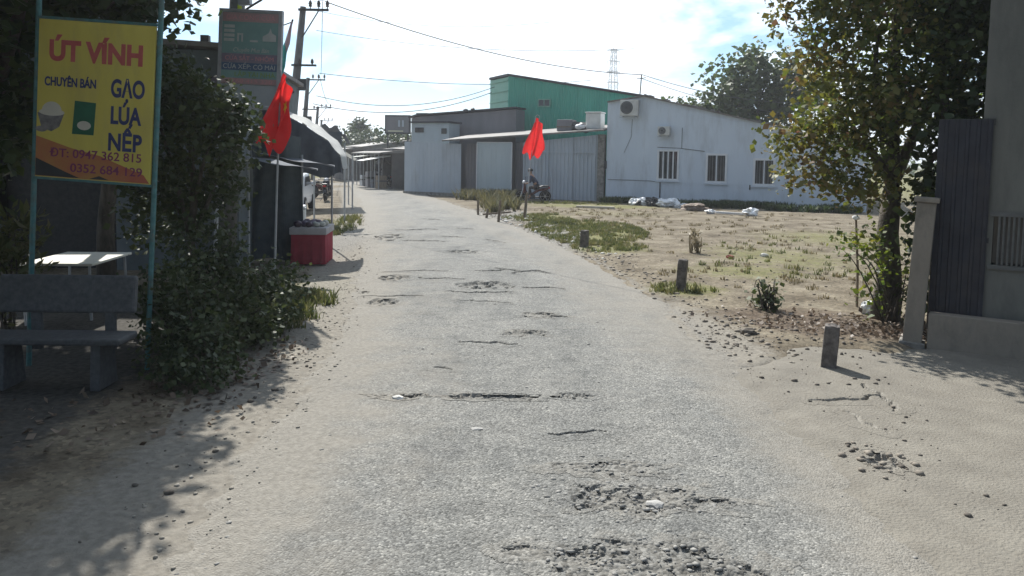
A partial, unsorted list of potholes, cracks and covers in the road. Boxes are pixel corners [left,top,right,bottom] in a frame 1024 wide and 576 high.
pothole [513,311,577,320]
pothole [536,479,775,525]
pothole [494,328,551,339]
crack [423,338,523,373]
pothole [858,447,917,479]
pothole [426,392,562,402]
crack [359,218,569,307]
pothole [473,528,809,576]
crack [539,425,616,441]
crack [800,381,916,438]
